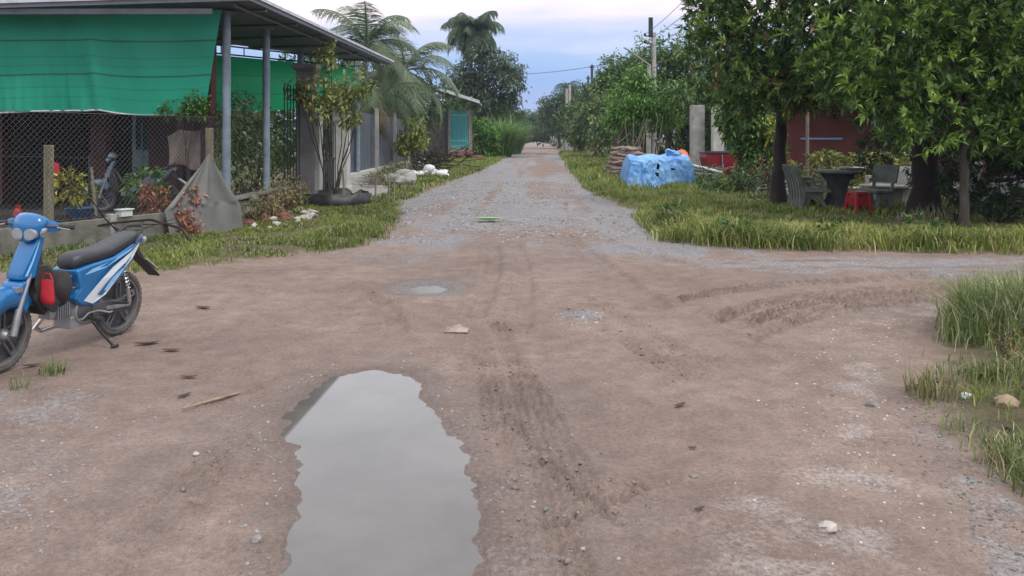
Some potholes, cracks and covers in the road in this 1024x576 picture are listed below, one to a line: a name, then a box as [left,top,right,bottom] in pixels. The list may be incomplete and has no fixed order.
pothole [388,279,466,295]
pothole [271,367,504,576]
